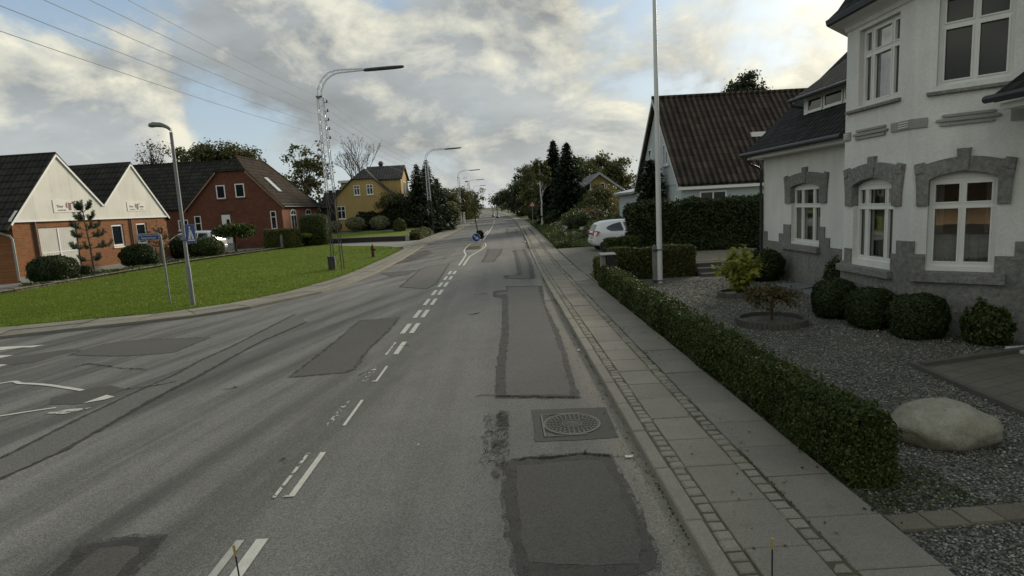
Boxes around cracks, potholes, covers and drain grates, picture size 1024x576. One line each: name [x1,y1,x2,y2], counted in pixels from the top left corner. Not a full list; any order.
manhole cover [541,412,601,437]
